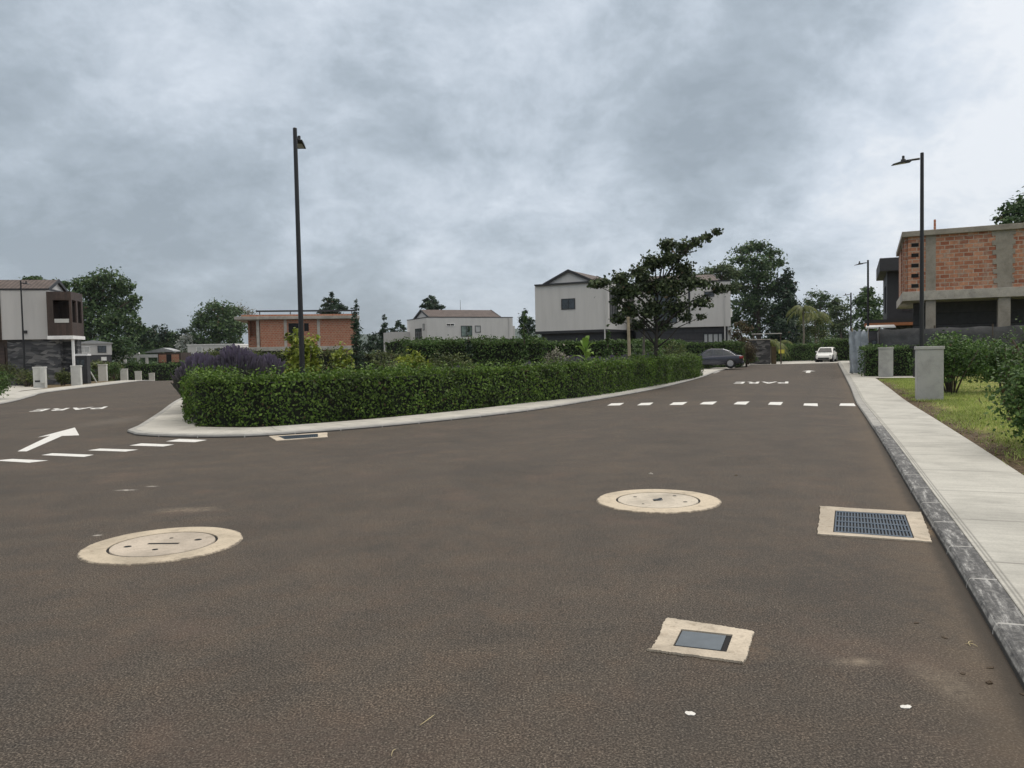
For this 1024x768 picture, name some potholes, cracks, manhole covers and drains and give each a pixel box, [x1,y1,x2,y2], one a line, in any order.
manhole cover [596,489,722,514]
manhole cover [77,527,243,566]
drain grate [817,506,932,543]
drain grate [269,432,328,441]
utility cover [647,618,755,664]
